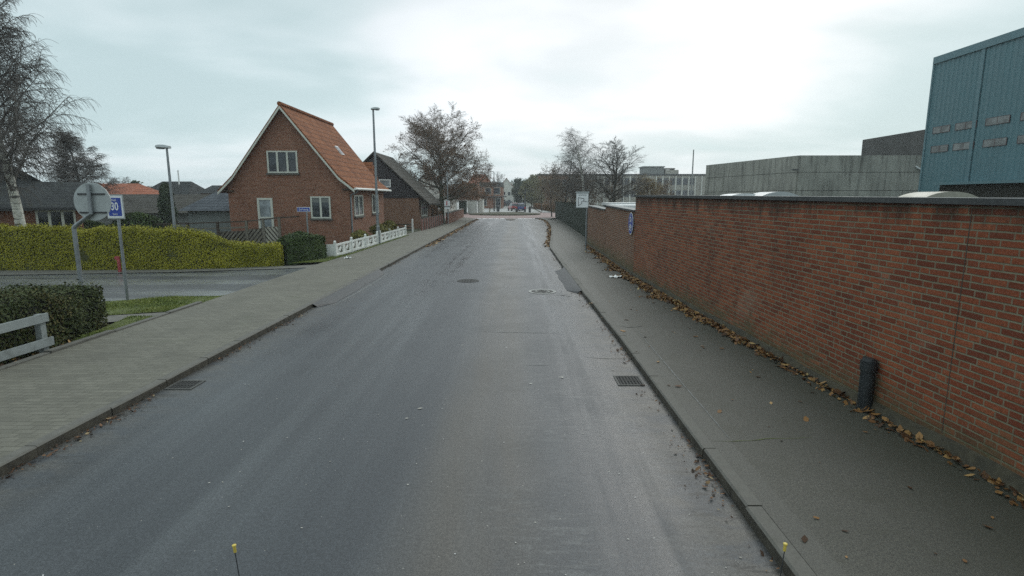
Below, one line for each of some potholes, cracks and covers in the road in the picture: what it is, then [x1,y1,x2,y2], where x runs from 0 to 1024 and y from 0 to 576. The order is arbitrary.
drain grate [164,380,206,390]
drain grate [613,376,645,386]
